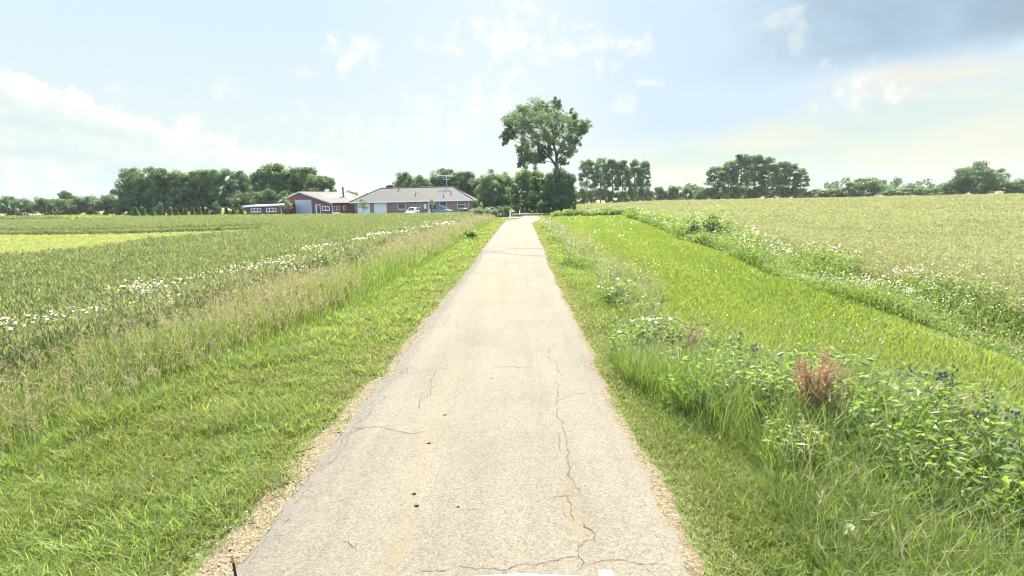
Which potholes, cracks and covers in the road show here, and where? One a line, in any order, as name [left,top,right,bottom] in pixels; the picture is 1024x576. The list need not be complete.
crack [241,252,484,574]
crack [419,356,667,572]
pothole [411,501,427,509]
